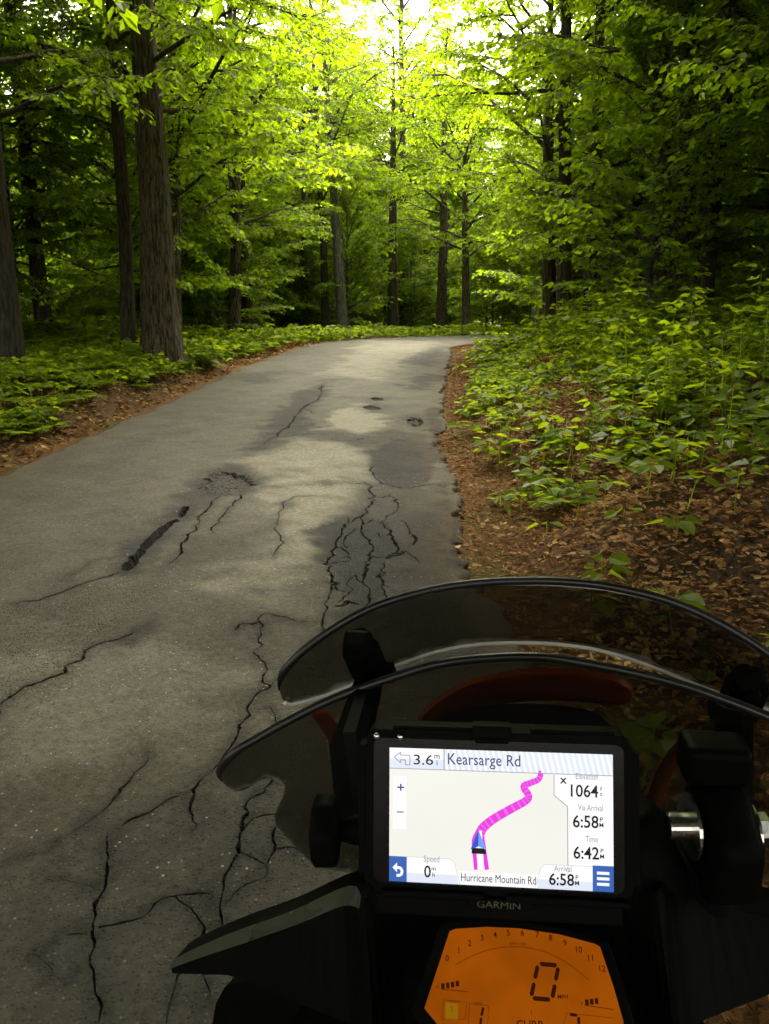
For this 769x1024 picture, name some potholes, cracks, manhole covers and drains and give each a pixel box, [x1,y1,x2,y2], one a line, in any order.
crack [30,483,419,1024]
pothole [405,417,423,427]
pothole [196,471,258,495]
crack [263,379,329,445]
crack [0,632,134,714]
